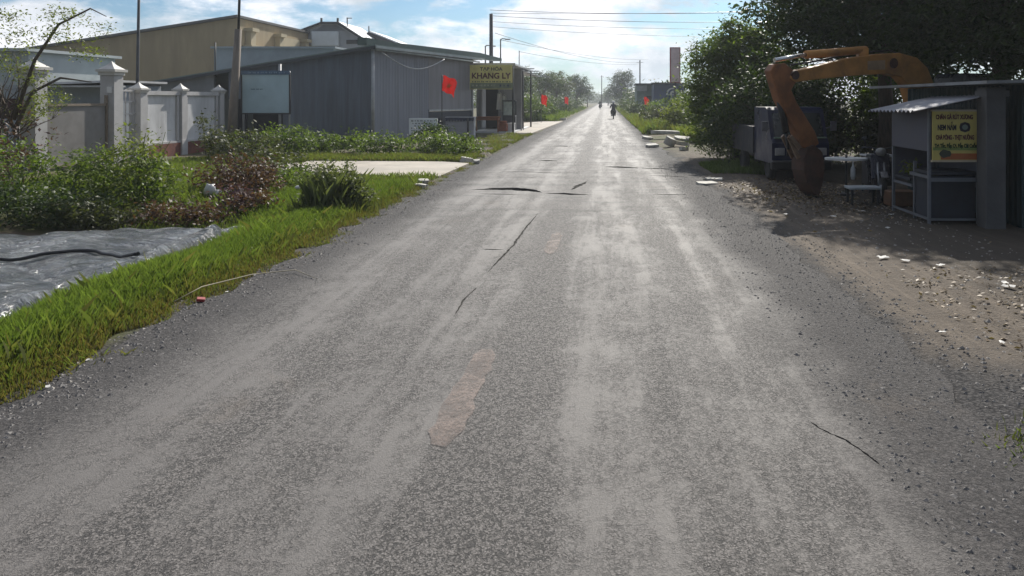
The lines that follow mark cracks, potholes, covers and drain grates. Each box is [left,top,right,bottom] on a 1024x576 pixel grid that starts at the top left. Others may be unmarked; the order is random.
crack [455,216,536,314]
crack [811,422,880,465]
